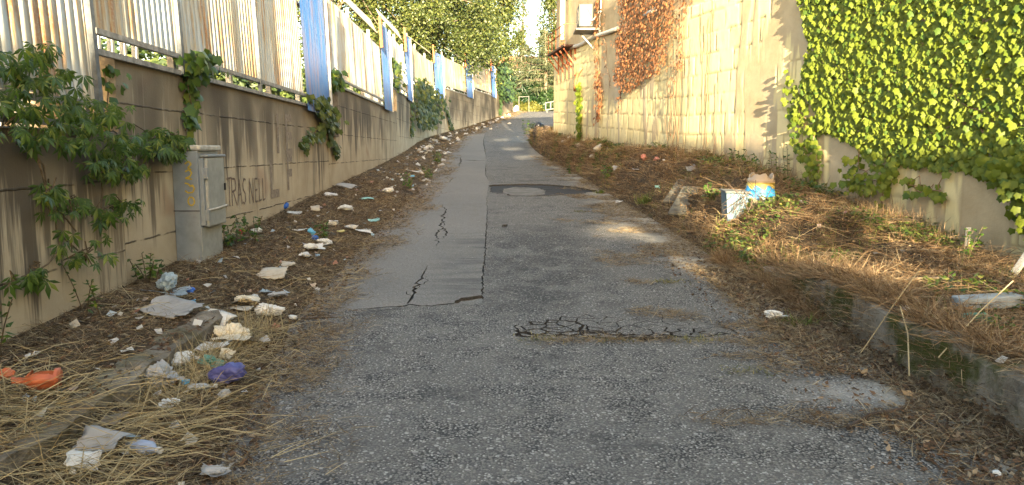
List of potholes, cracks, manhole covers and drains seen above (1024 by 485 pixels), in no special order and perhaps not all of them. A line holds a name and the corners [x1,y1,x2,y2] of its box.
crack [435,205,448,246]
crack [341,267,453,312]
